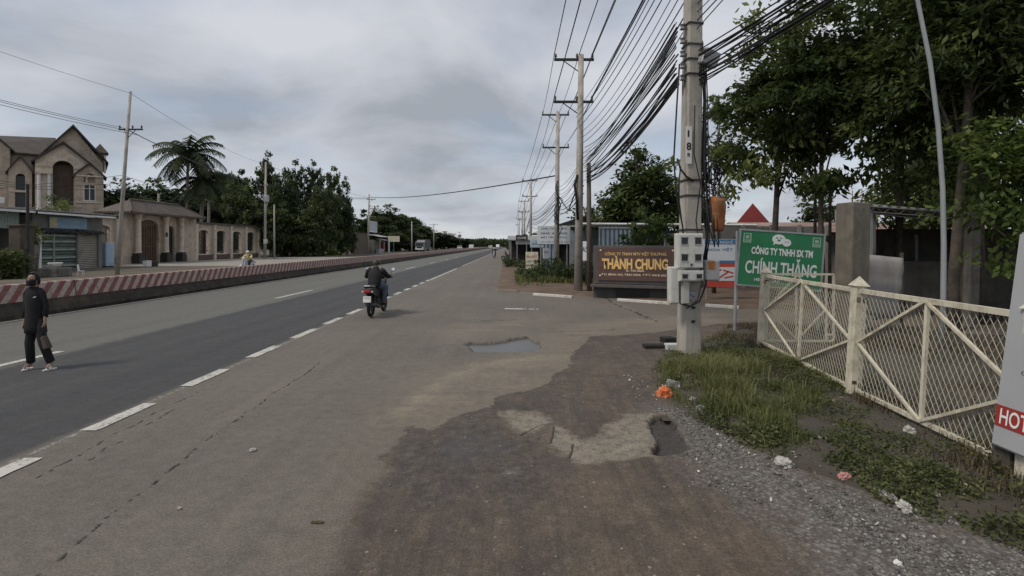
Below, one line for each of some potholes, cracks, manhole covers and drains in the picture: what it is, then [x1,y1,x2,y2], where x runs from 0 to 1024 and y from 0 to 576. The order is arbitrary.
pothole [457,335,553,354]
pothole [633,410,706,461]
crack [510,419,588,464]
